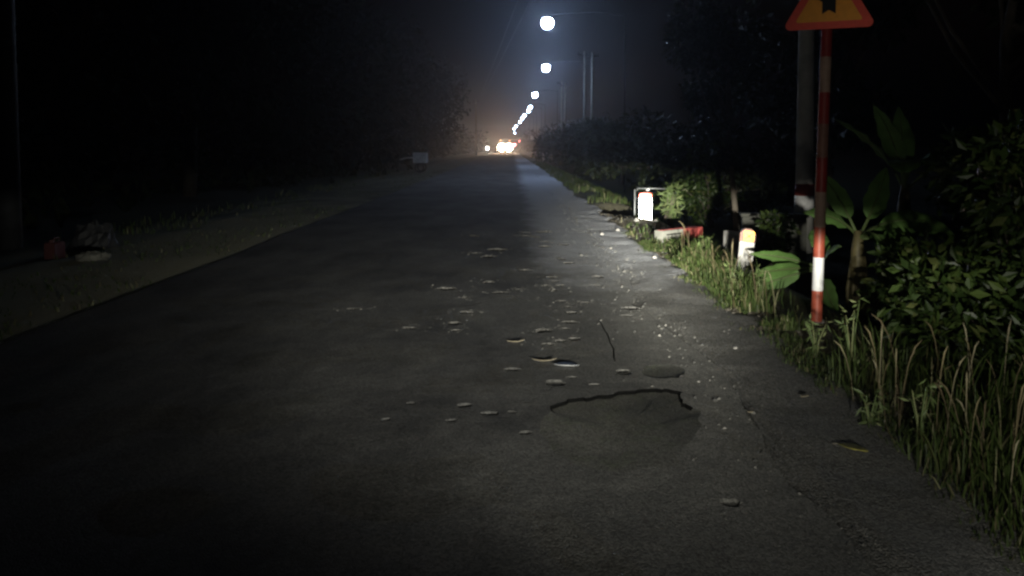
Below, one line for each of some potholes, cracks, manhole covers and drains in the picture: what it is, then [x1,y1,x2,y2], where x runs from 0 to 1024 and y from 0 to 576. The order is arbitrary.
crack [598,319,629,375]
pothole [641,364,685,378]
pothole [540,388,702,472]
